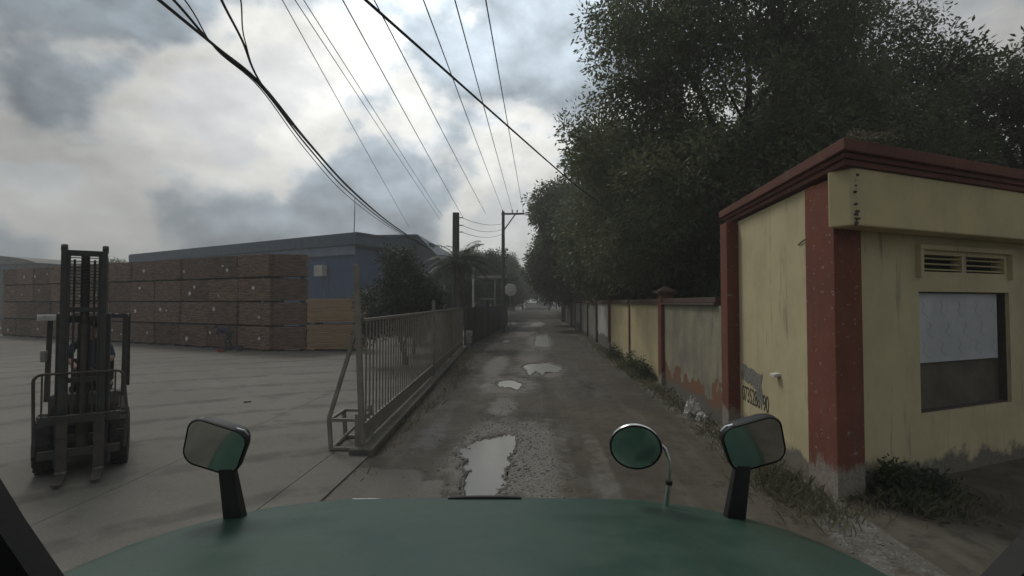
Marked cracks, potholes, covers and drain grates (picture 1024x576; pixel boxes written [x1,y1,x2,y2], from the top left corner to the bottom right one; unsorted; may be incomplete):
pothole [493,378,526,391]
pothole [450,430,524,496]
pothole [518,361,565,377]
pothole [534,334,550,348]
